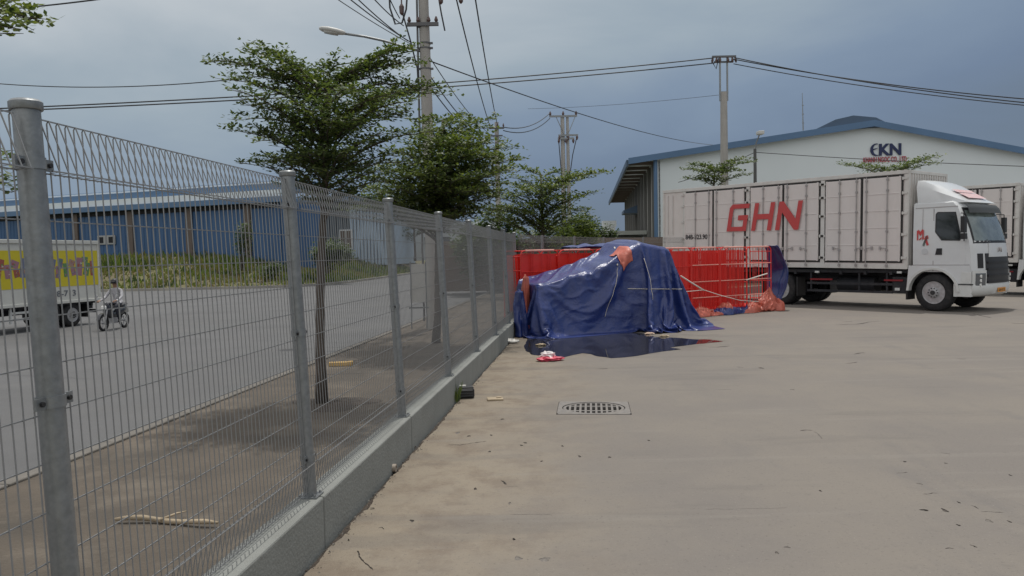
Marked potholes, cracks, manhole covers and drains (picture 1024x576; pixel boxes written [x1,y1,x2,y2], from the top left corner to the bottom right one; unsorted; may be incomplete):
drain grate [556,401,632,415]
